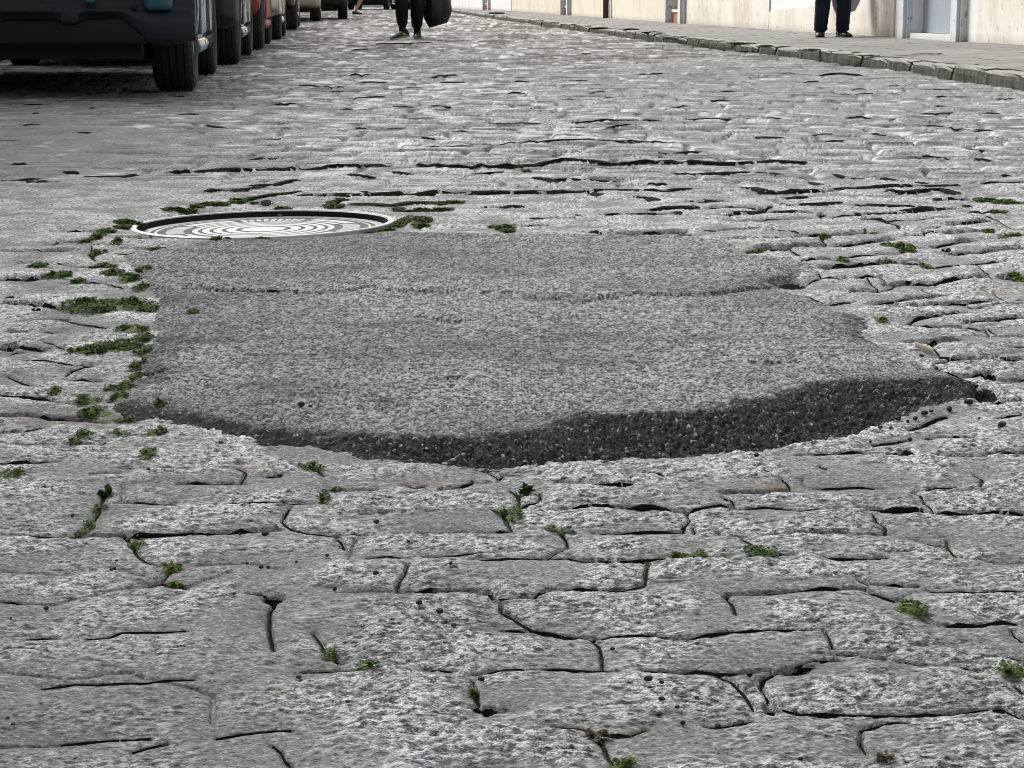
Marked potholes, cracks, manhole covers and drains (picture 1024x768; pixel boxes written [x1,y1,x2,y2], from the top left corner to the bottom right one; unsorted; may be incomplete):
crack [320,197,350,209]
crack [555,727,646,766]
crack [227,191,302,202]
crack [858,581,905,603]
crack [782,709,1022,720]
crack [126,539,158,567]
crack [932,261,1007,269]
crack [122,528,275,541]
crack [416,158,717,169]
crack [248,179,300,189]
crack [166,163,391,173]
crack [583,472,664,487]
